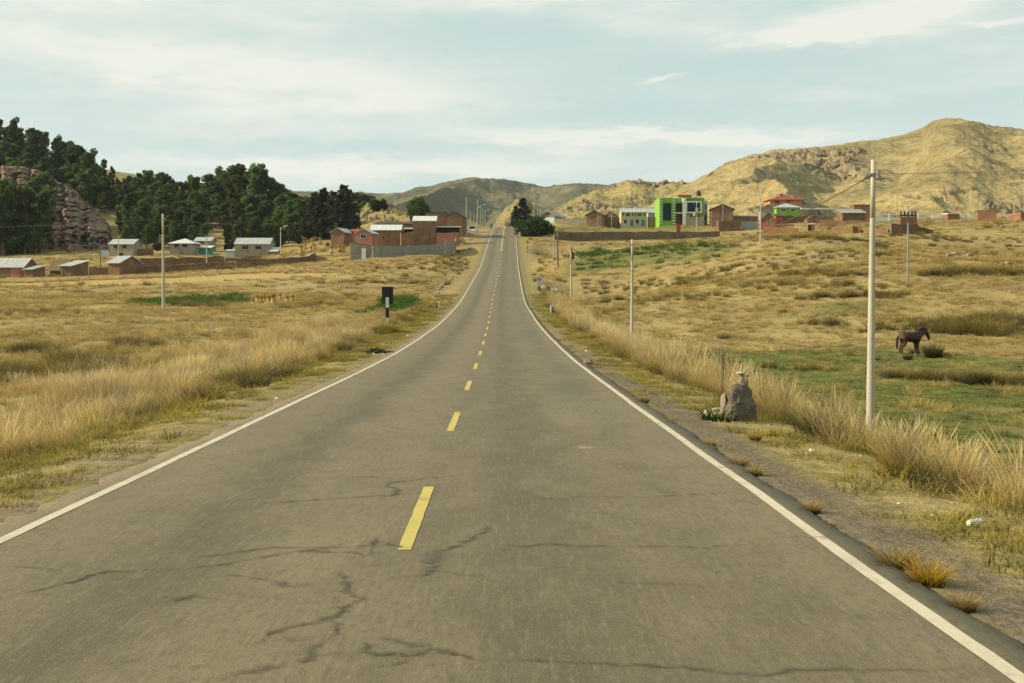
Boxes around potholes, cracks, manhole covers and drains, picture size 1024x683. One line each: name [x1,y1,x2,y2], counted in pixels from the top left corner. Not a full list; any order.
crack [631,663,813,675]
crack [27,538,401,672]
crack [363,639,471,663]
crack [401,527,489,577]
